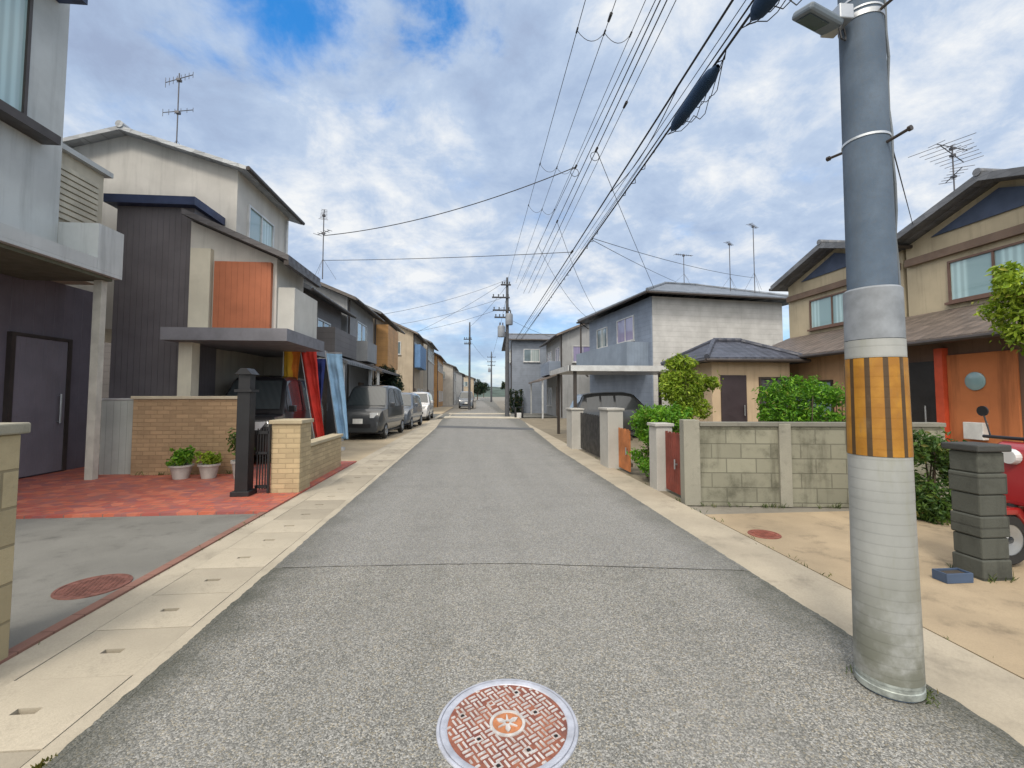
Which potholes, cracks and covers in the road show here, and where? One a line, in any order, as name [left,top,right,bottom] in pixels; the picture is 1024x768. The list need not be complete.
manhole cover [51,573,133,600]
manhole cover [436,679,579,768]
manhole cover [747,529,782,539]
